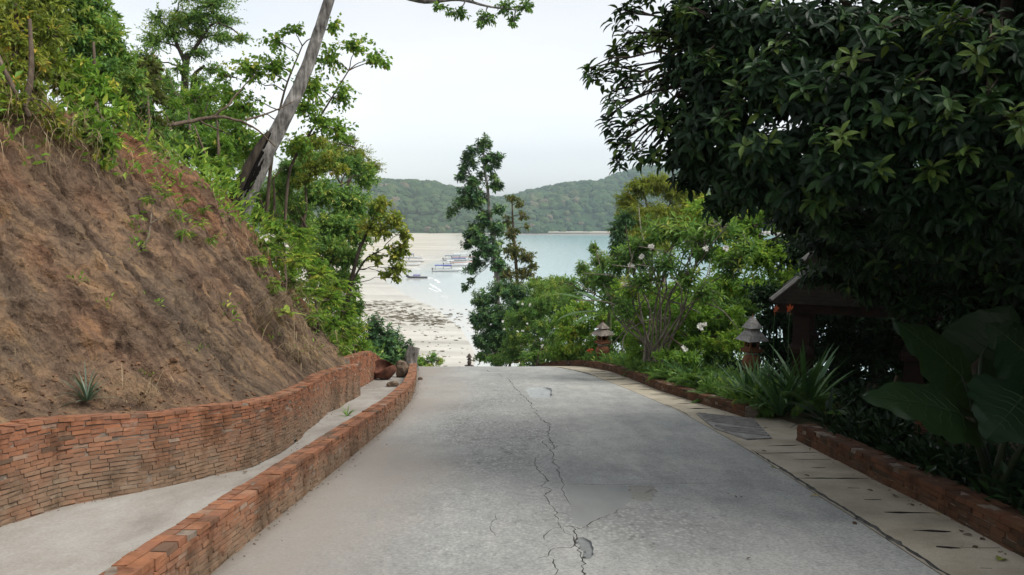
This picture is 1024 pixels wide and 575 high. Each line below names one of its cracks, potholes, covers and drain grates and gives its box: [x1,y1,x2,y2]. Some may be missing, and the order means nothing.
pothole [576,537,594,559]
crack [474,376,669,575]
